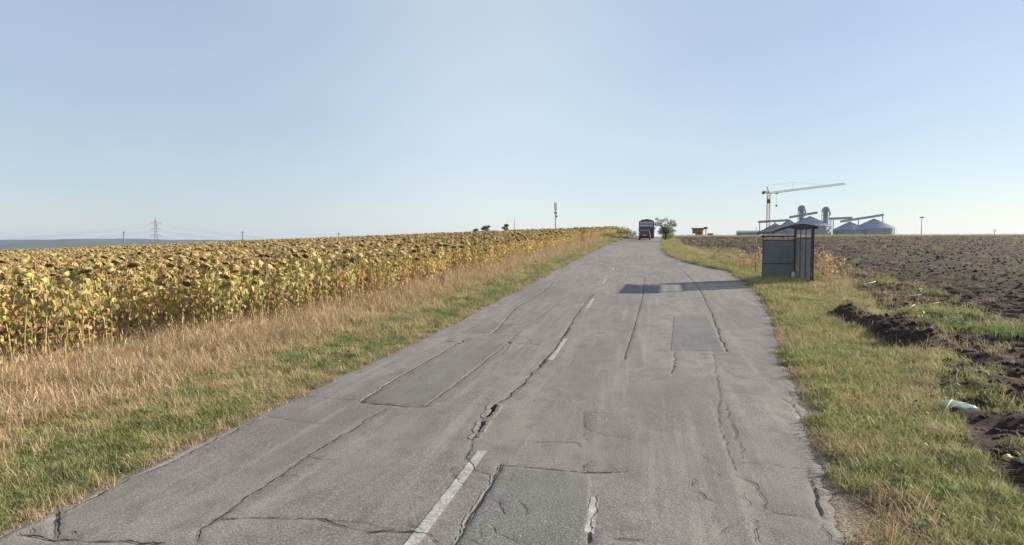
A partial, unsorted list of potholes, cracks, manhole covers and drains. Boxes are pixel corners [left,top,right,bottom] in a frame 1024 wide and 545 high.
crack [681,269,832,544]
crack [197,396,441,544]
crack [20,416,312,544]
